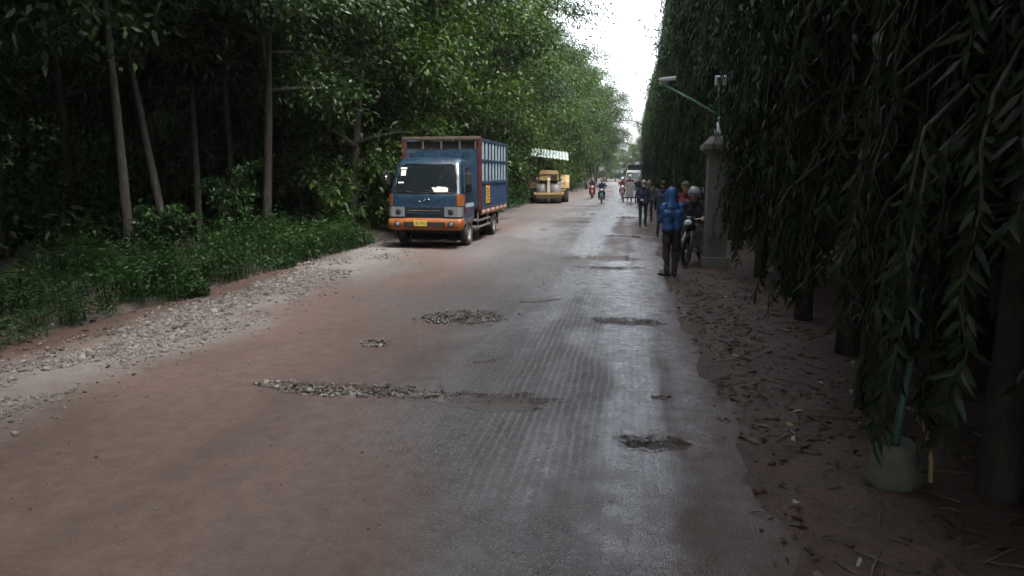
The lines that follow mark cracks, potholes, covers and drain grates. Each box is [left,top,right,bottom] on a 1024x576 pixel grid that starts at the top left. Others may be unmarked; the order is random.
pothole [589,317,669,327]
pothole [229,378,485,404]
pothole [557,254,647,263]
pothole [359,338,393,348]
pothole [400,390,574,413]
pothole [611,433,692,452]
pothole [411,309,521,326]
